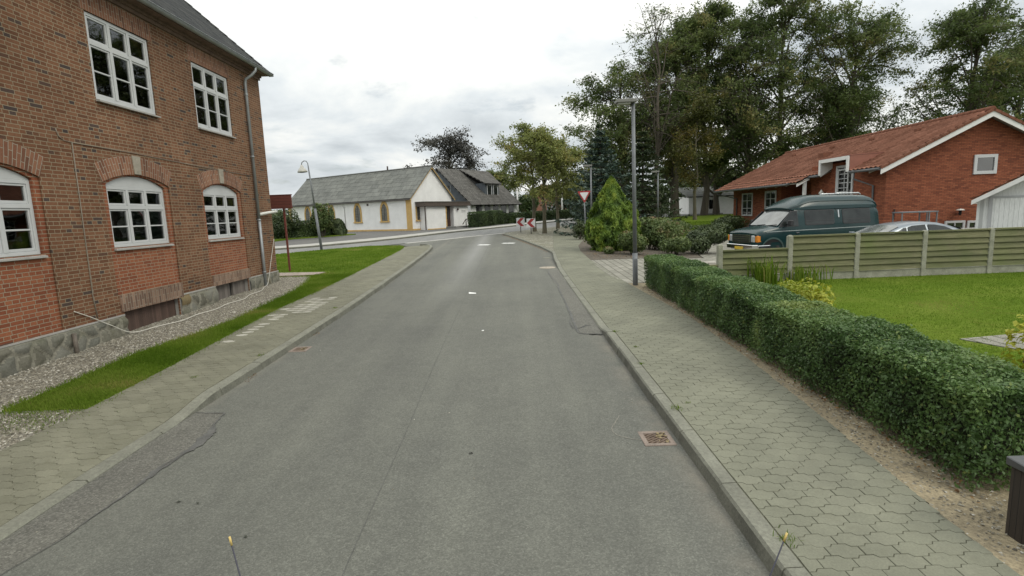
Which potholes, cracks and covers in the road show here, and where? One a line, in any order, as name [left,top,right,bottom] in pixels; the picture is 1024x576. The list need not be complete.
drain grate [638,431,677,447]
